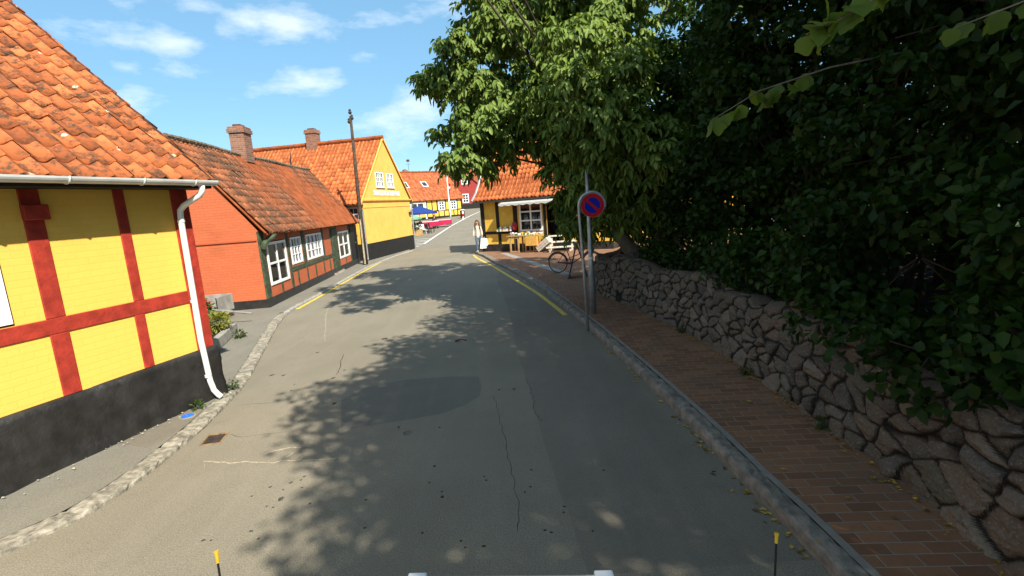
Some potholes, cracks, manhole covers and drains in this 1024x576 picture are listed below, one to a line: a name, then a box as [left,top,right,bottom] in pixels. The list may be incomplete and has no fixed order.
crack [493,397,519,530]
crack [203,431,336,469]
